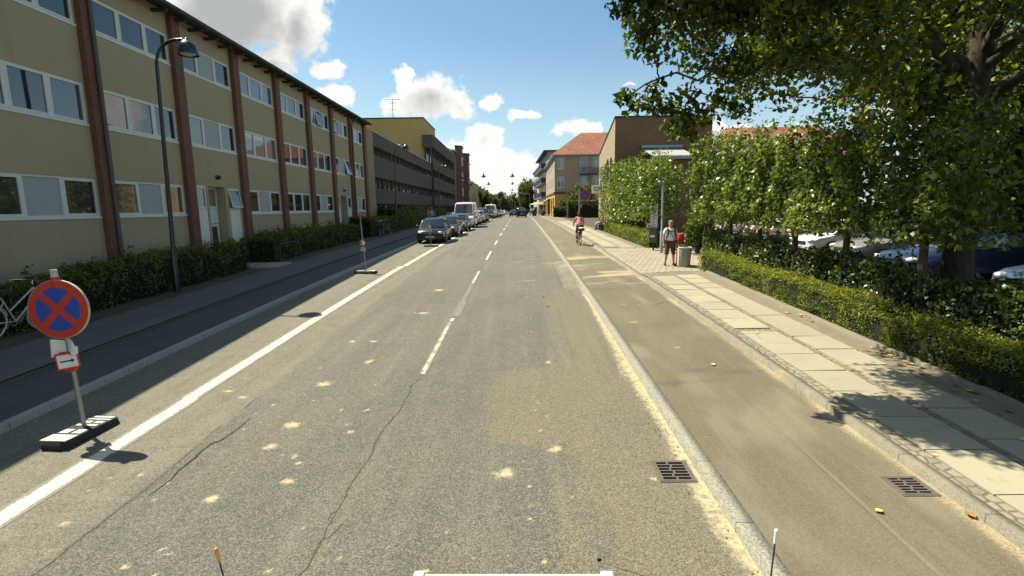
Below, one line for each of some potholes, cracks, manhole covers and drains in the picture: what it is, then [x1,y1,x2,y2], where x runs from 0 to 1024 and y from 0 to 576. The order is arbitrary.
crack [298,382,415,576]
crack [149,417,252,495]
